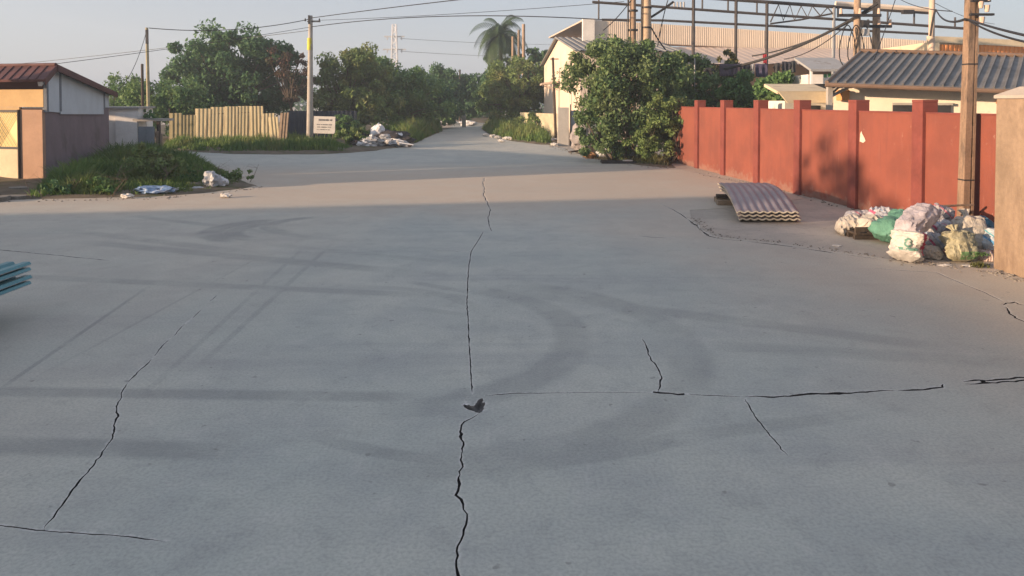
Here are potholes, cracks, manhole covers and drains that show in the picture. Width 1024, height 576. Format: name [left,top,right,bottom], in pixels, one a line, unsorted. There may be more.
crack [461,178,944,453]
crack [0,296,216,541]
crack [455,414,478,576]
